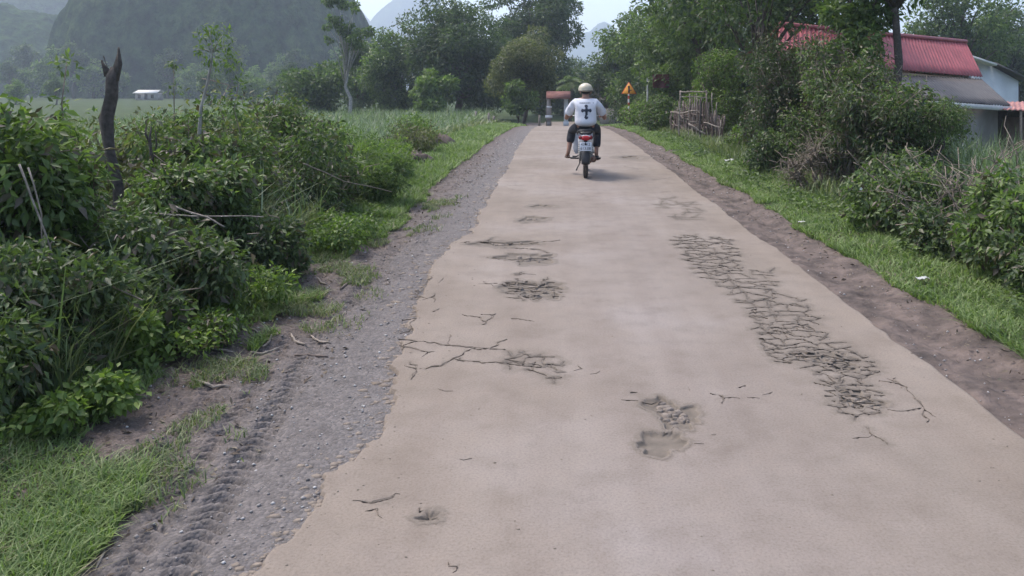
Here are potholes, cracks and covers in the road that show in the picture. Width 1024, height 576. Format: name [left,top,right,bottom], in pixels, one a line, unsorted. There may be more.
crack [621,156,936,444]
crack [462,237,563,325]
pothole [636,393,705,433]
pothole [406,507,447,525]
crack [398,339,600,383]
pothole [630,429,694,460]
